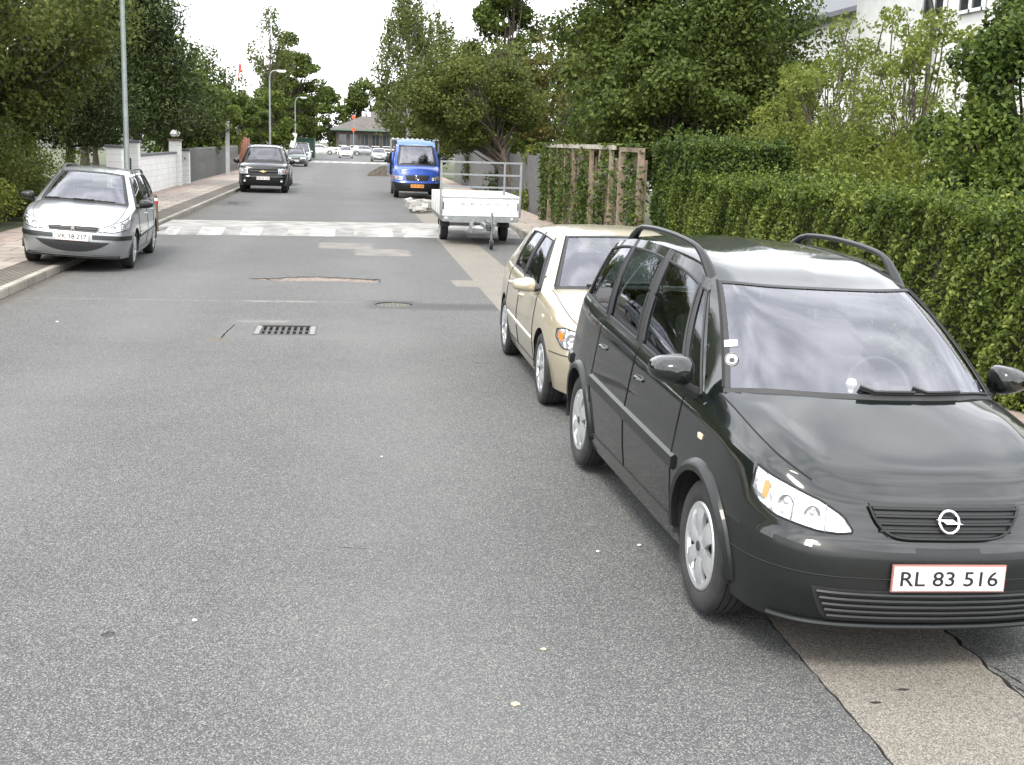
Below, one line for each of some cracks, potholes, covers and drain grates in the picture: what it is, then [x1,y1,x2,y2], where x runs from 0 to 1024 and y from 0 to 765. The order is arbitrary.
crack [944,630,1024,698]
